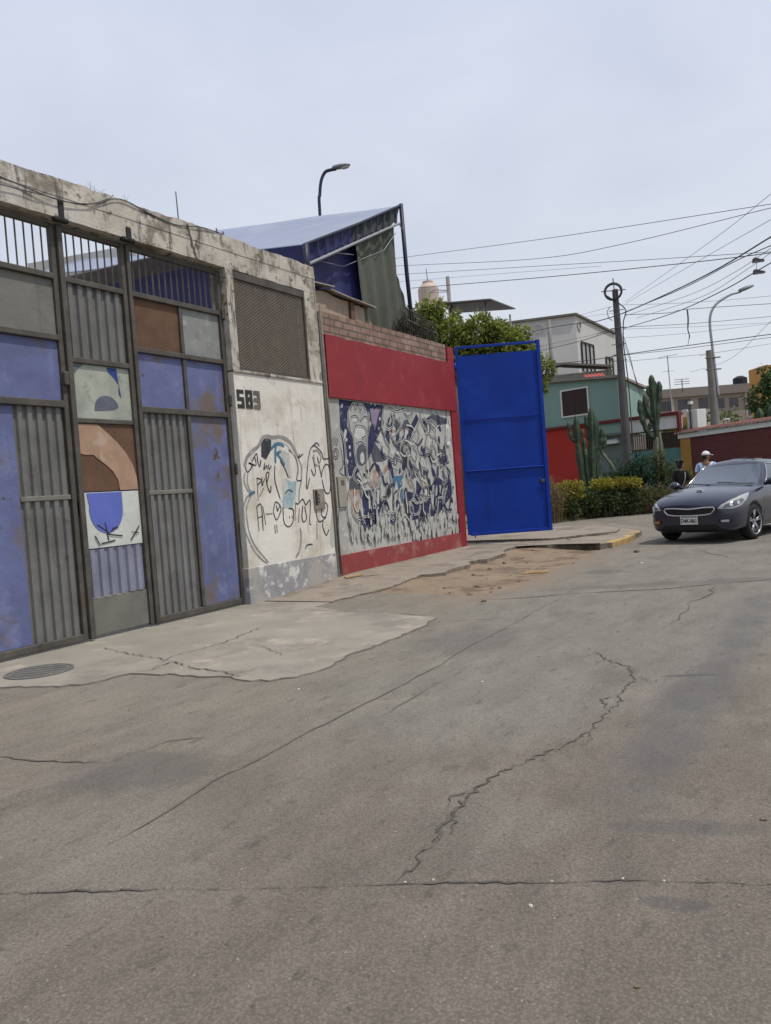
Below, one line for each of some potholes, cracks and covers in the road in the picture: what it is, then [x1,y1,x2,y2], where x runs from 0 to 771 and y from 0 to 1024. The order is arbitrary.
crack [395,647,649,882]
crack [0,737,197,763]
manhole cover [3,663,74,680]
crack [7,619,435,688]
